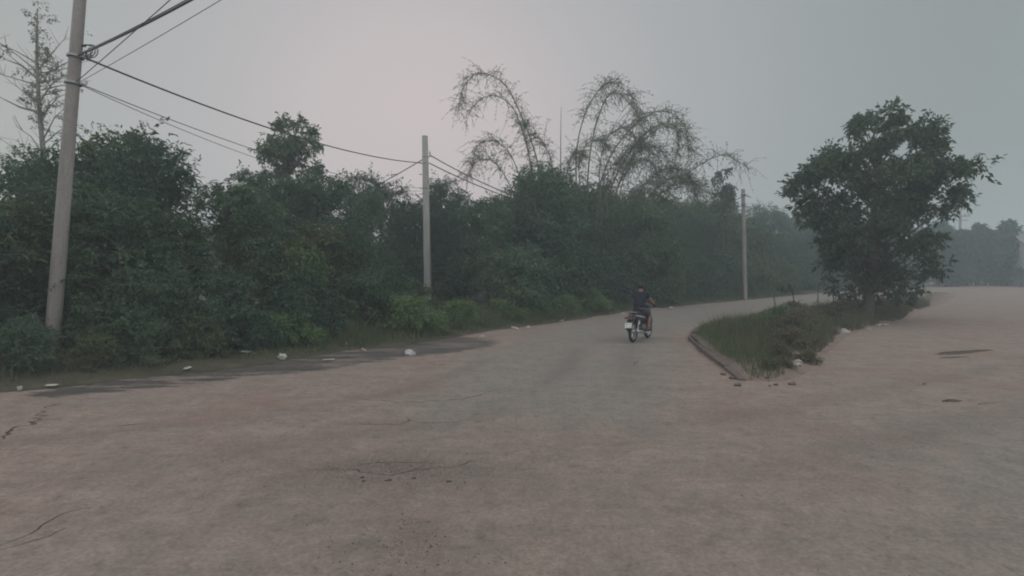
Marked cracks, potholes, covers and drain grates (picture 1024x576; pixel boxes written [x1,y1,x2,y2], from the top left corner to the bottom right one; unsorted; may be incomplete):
crack [309,460,479,480]
crack [1,403,62,440]
crack [1,507,91,550]
crack [359,391,491,425]
